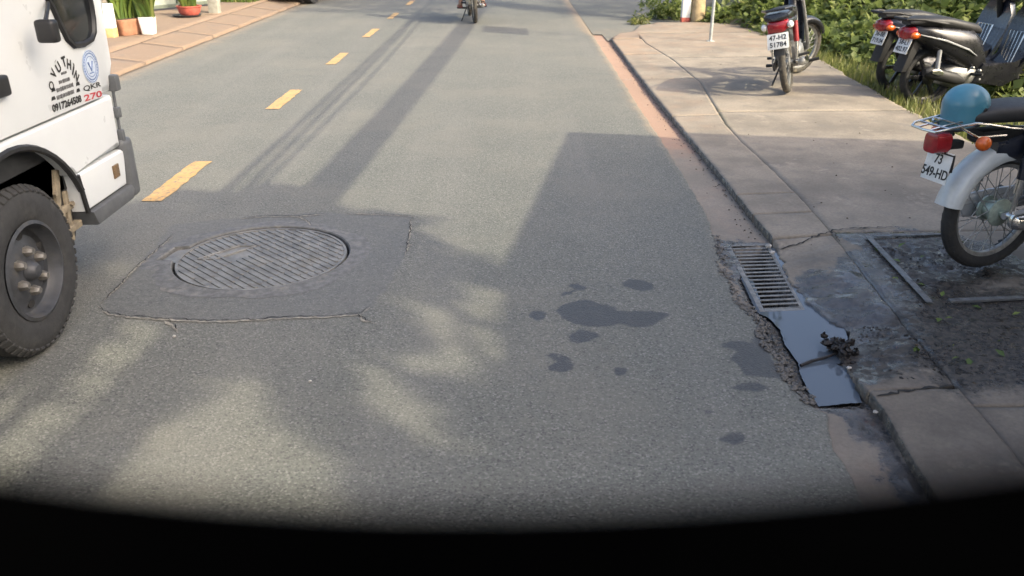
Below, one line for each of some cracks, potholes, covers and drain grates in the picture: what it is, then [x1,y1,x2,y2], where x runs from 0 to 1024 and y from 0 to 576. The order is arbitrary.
manhole cover [139,220,372,299]
pothole [757,318,872,410]
crack [237,213,412,254]
drain grate [727,243,805,317]
crack [97,237,373,331]
